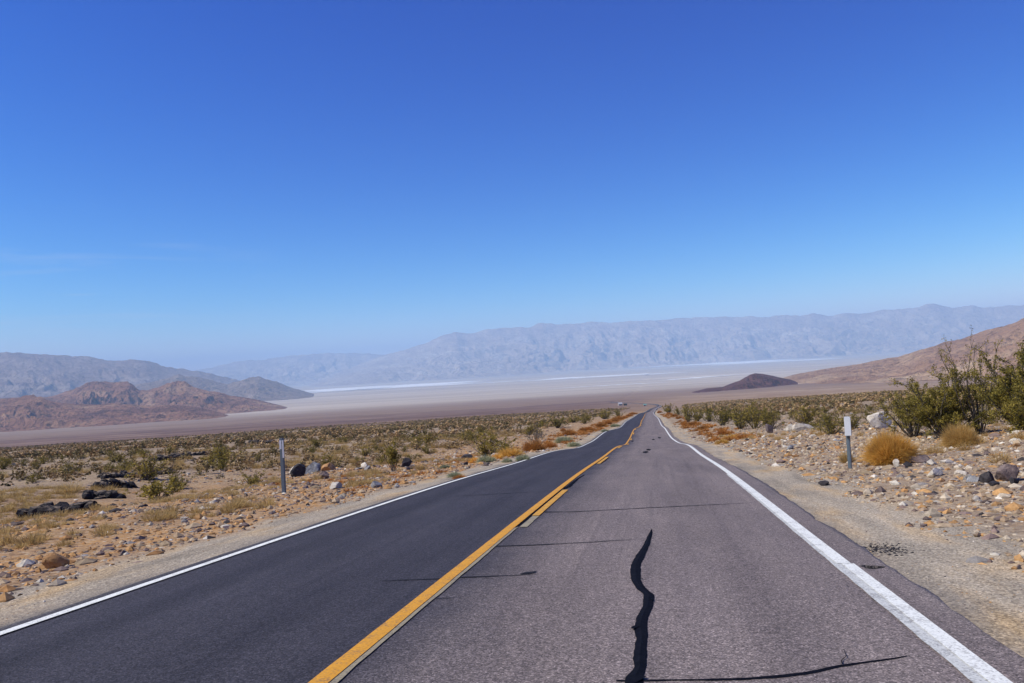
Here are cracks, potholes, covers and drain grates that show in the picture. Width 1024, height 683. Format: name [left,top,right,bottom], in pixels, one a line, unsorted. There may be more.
crack [546,502,754,512]
crack [381,571,536,581]
crack [616,649,907,681]
